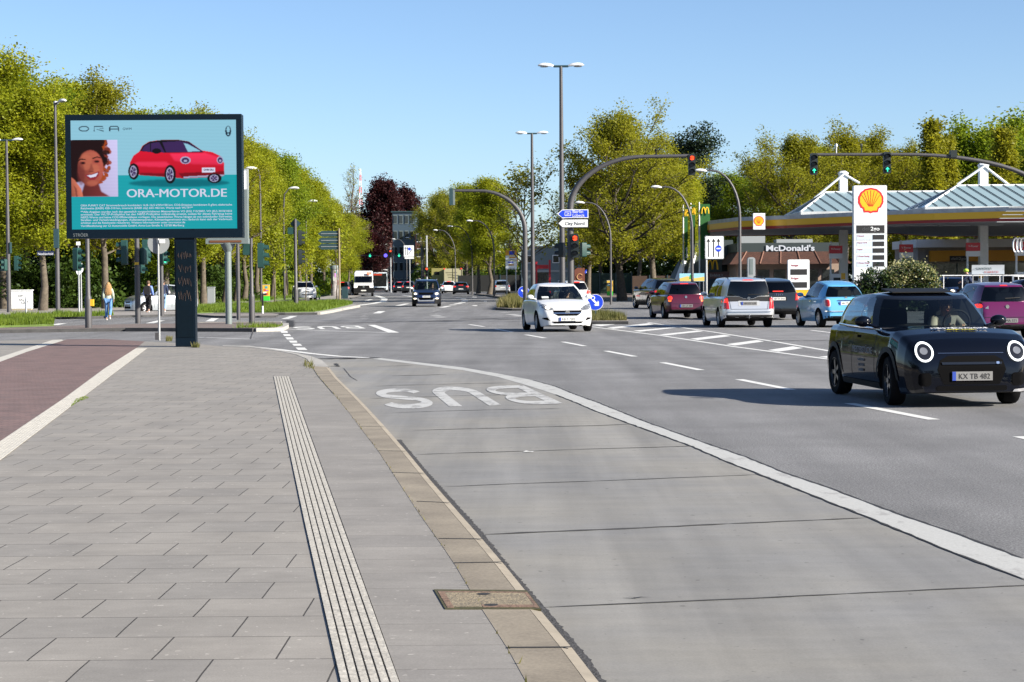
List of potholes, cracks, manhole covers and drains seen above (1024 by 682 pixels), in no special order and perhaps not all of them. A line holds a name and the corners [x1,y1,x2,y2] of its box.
crack [318,357,378,381]
manhole cover [434,589,541,618]
